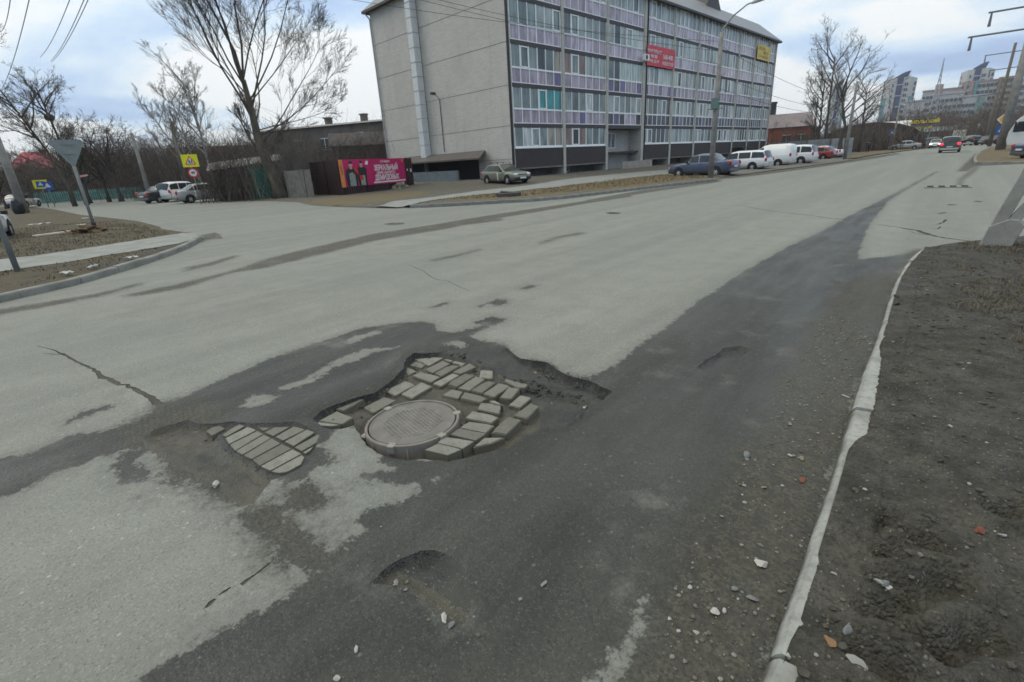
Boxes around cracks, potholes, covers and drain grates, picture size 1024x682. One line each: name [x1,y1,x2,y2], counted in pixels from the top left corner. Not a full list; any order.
crack [740,205,966,241]
pothole [696,346,751,369]
pothole [370,550,471,626]
crack [205,563,270,608]
crack [39,346,164,406]
pothole [313,346,612,459]
pothole [140,420,320,506]
manhole cover [364,400,463,460]
